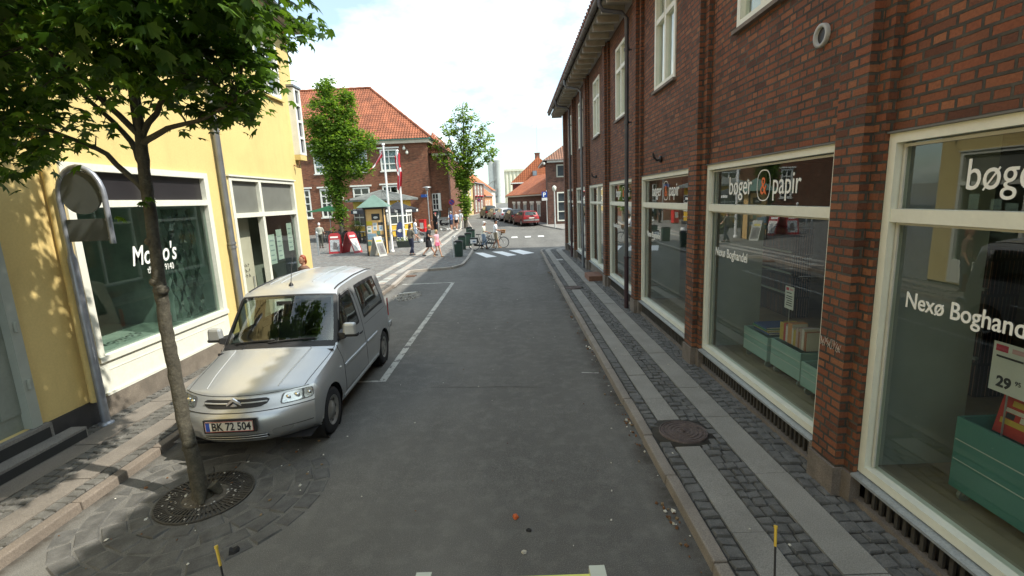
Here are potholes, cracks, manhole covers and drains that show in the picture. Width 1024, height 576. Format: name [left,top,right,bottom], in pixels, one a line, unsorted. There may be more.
manhole cover [659,420,708,444]
